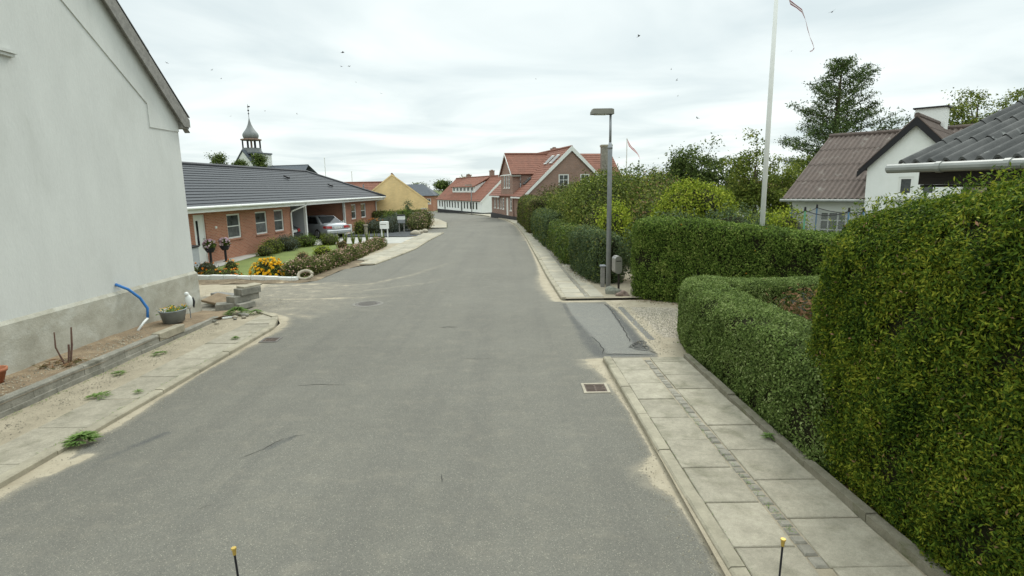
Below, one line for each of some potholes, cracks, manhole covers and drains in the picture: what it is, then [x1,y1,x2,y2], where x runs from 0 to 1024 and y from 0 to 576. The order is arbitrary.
drain grate [581,383,611,393]
